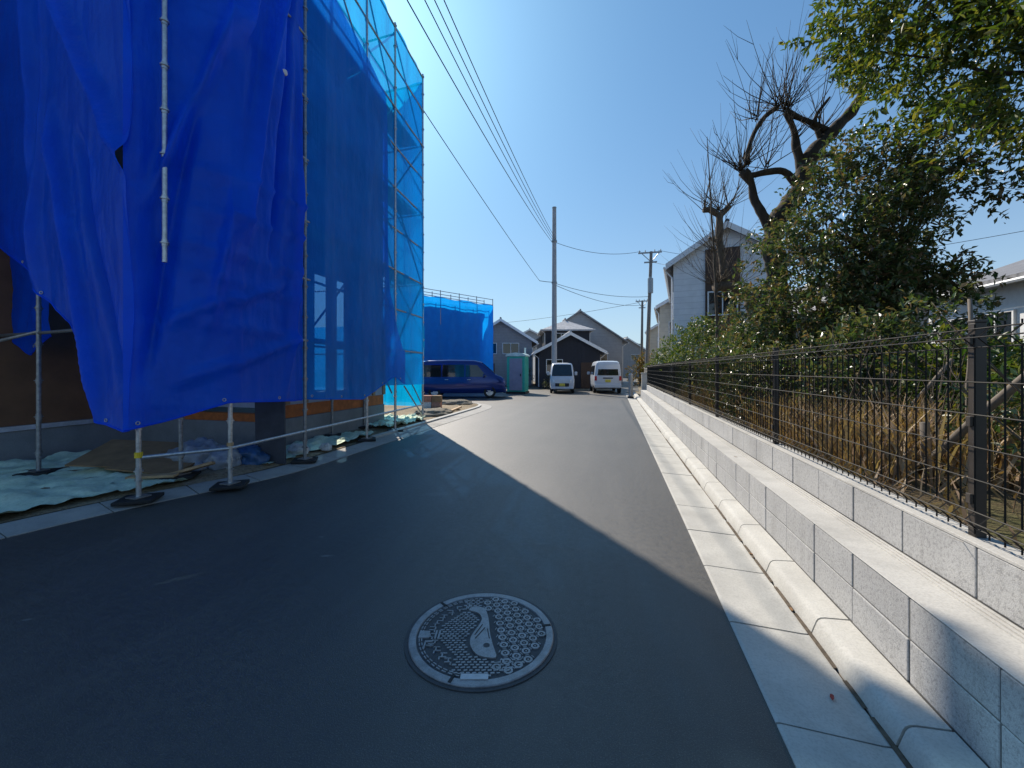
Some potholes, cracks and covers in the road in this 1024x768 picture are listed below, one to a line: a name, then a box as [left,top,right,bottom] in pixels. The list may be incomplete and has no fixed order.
manhole cover [404,592,557,692]
